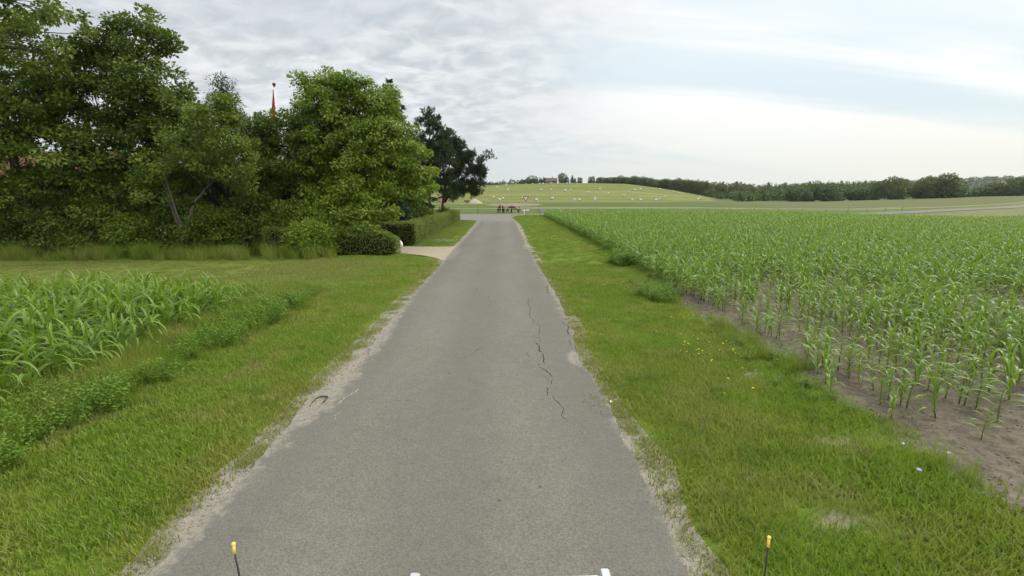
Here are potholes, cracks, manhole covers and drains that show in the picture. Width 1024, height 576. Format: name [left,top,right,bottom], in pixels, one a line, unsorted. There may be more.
crack [527,275,567,421]
